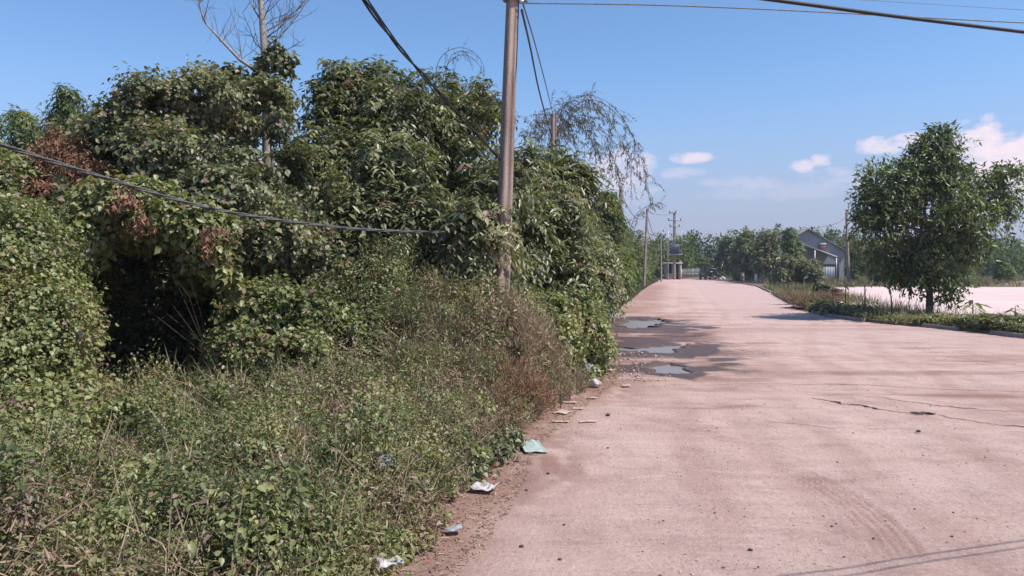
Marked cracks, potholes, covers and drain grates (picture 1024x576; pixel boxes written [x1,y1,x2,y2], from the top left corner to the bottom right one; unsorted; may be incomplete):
crack [673,383,1024,430]
pothole [637,362,697,375]
pothole [610,317,678,329]
pothole [614,342,694,354]
